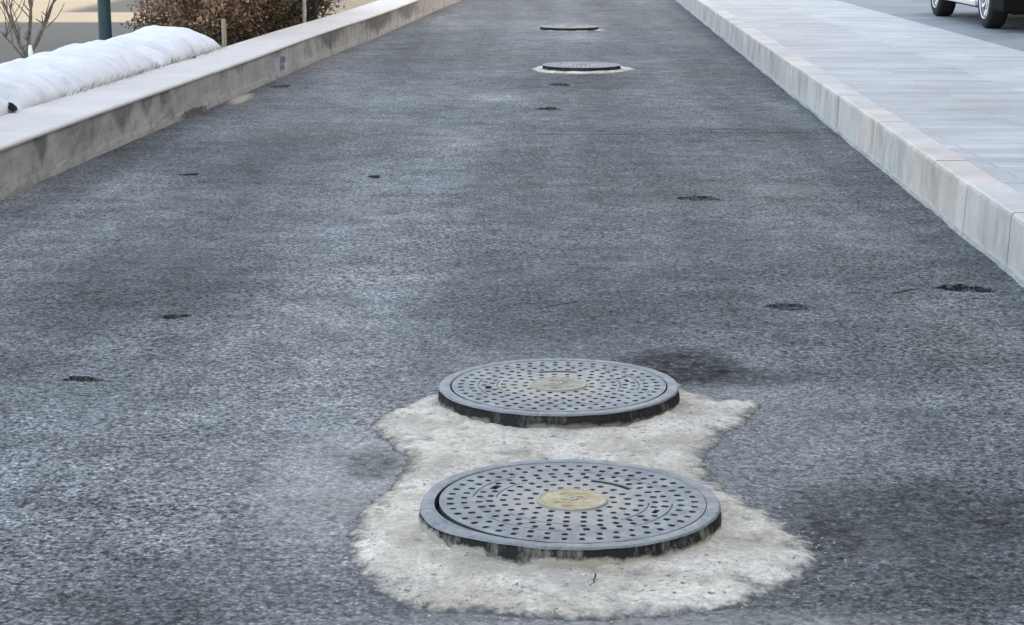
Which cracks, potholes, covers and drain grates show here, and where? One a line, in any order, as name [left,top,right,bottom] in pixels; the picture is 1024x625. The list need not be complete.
manhole cover [418,459,722,567]
manhole cover [542,61,621,71]
manhole cover [438,358,680,429]
crack [848,288,974,299]
pothole [932,284,997,293]
pothole [763,303,811,311]
